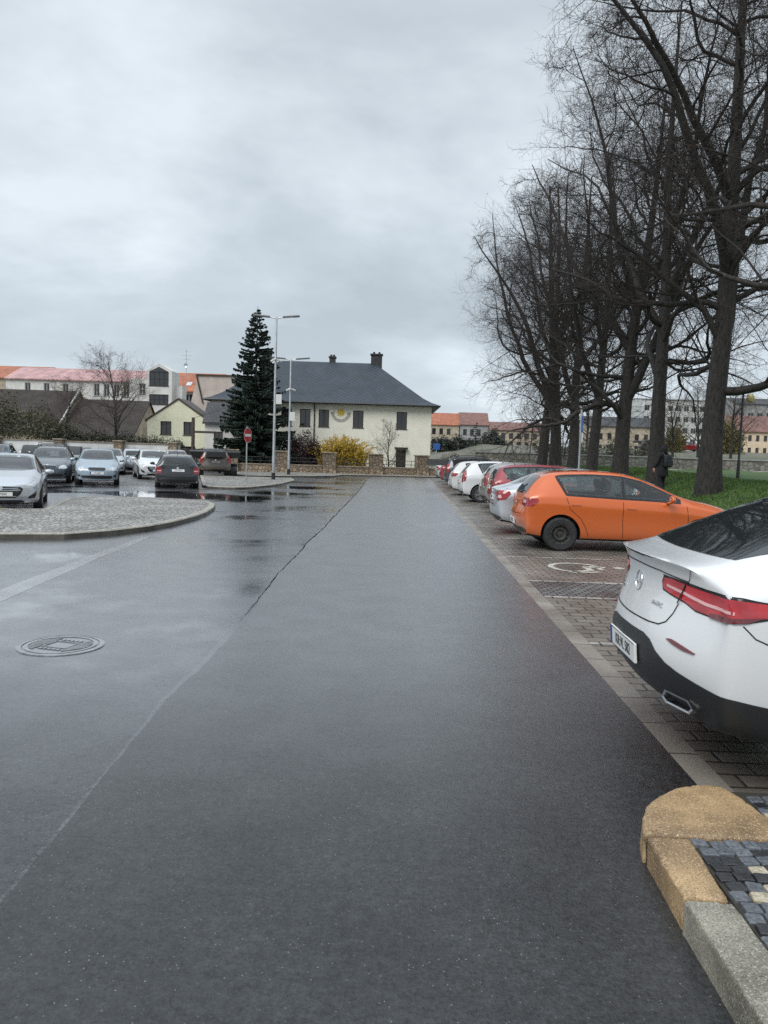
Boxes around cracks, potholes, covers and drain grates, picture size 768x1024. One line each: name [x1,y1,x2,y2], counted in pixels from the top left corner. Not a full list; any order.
manhole cover [15,635,105,656]
